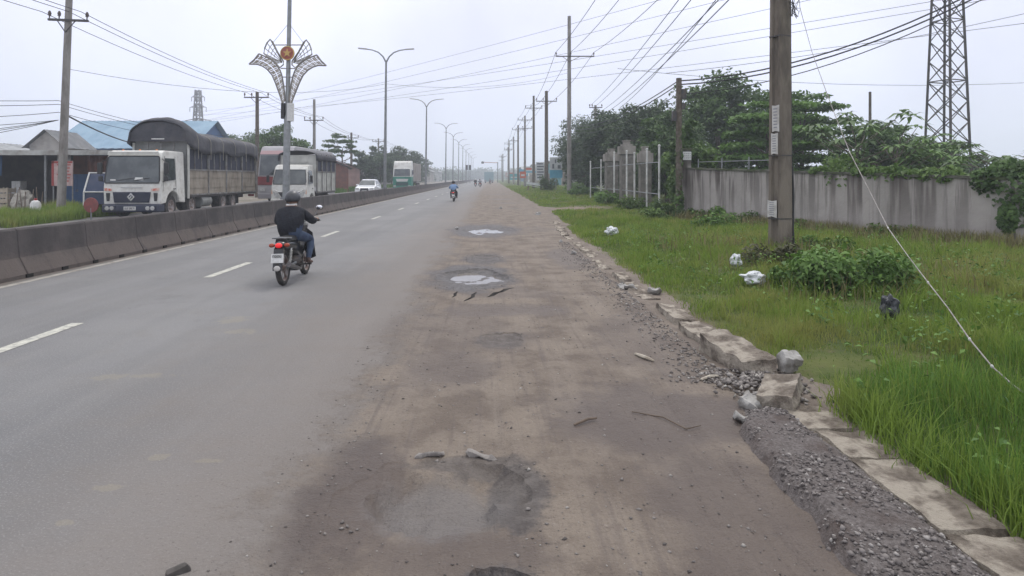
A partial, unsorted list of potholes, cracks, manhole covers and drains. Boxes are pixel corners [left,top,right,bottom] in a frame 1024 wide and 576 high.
pothole [453,225,517,236]
pothole [438,268,509,288]
pothole [328,461,533,557]
